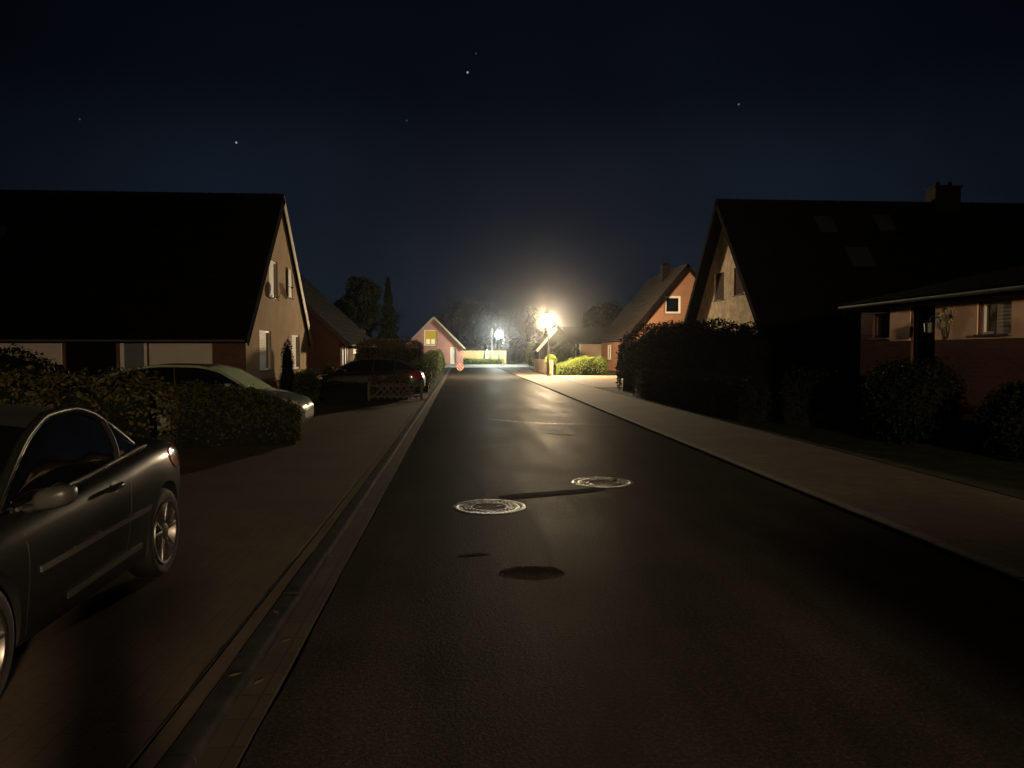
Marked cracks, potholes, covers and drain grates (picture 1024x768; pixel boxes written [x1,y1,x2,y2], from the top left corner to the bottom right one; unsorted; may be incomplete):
manhole cover [572,477,634,488]
manhole cover [453,499,526,514]
pothole [498,566,566,581]
